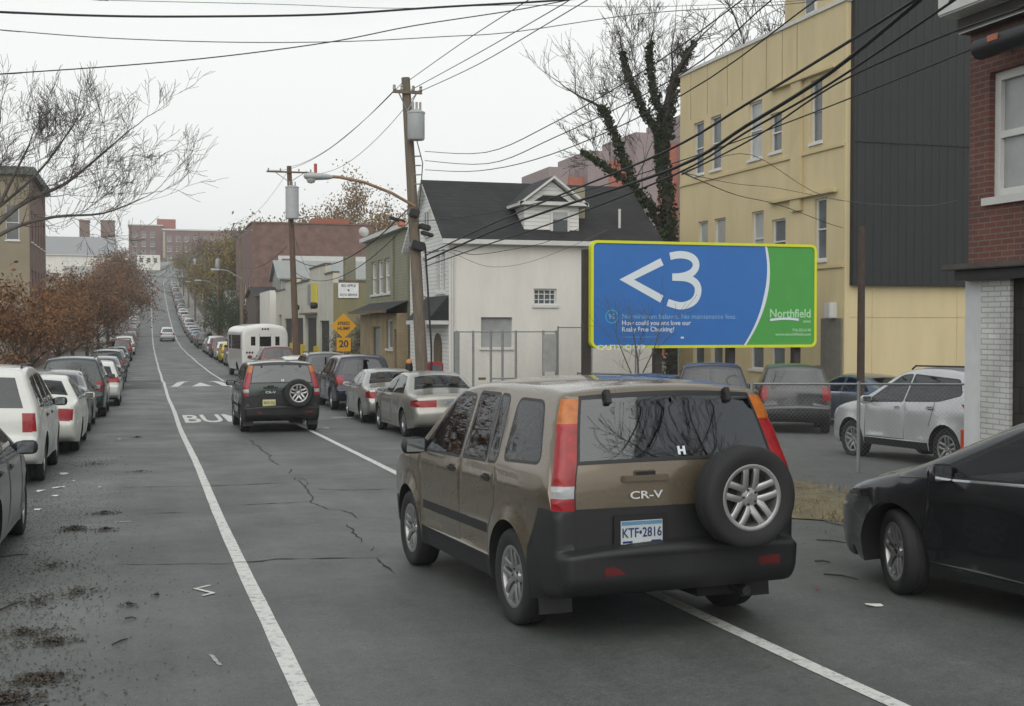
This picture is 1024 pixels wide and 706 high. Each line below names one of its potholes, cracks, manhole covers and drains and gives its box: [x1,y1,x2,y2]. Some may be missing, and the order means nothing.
crack [113,440,393,572]
